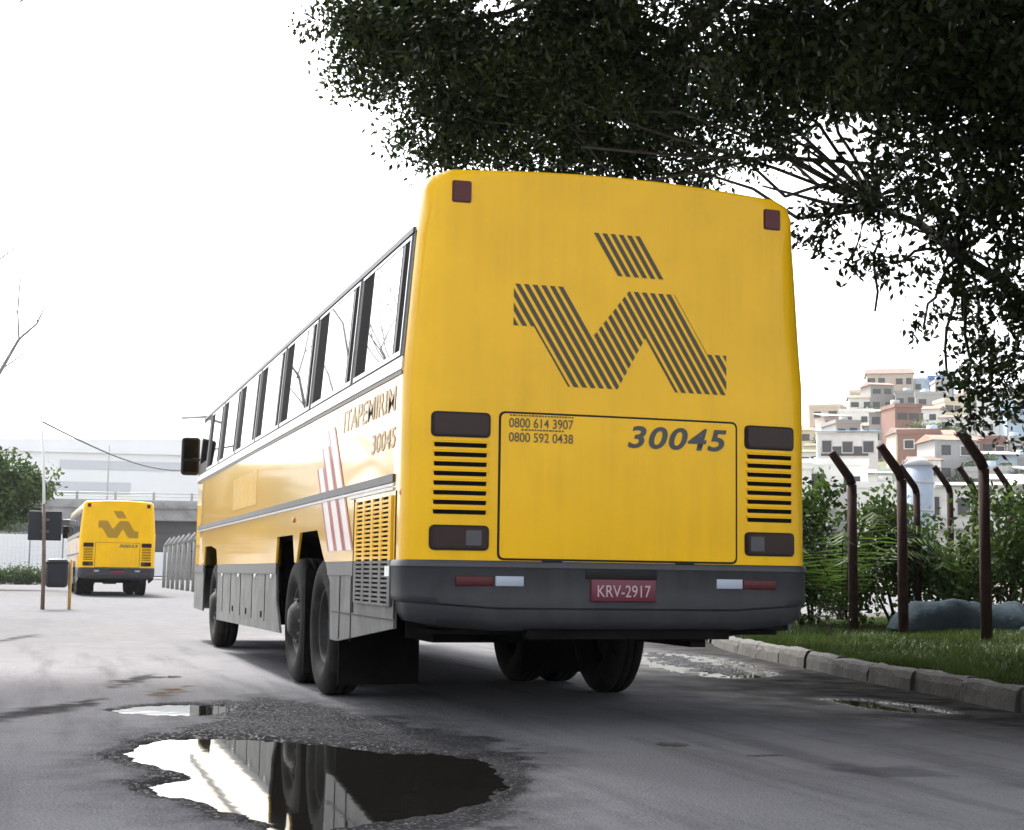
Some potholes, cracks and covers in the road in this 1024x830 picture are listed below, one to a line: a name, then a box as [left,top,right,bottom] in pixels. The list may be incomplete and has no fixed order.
pothole [102,732,532,830]
pothole [105,702,239,716]
